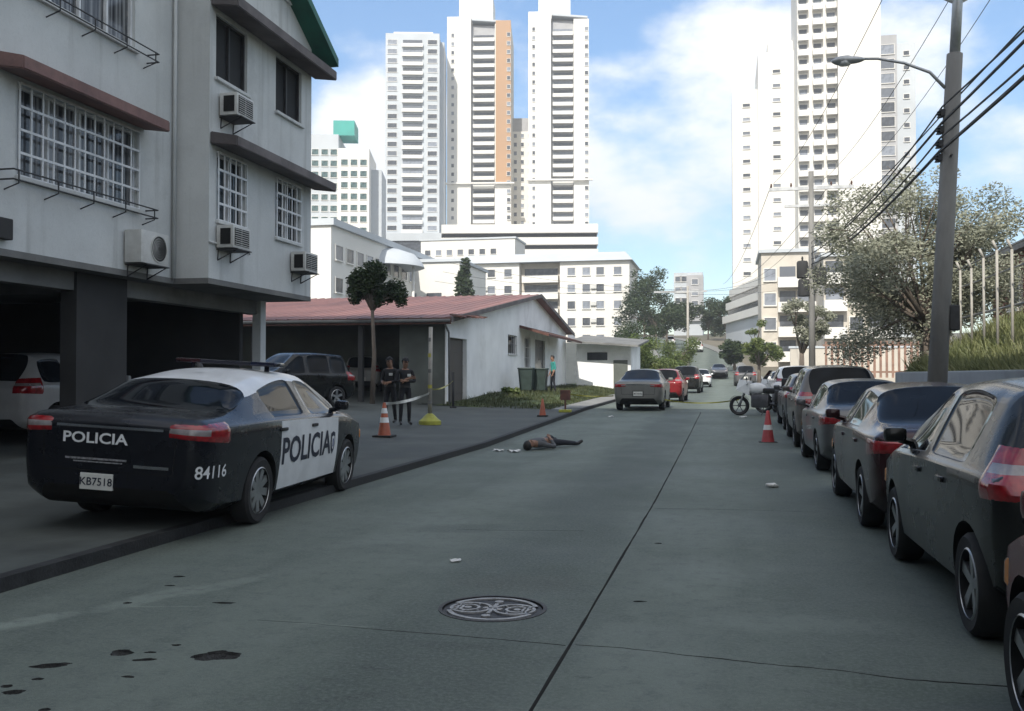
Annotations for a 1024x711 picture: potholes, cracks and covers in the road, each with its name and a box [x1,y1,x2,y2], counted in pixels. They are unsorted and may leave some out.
pothole [190,650,241,661]
manhole cover [438,595,547,622]
